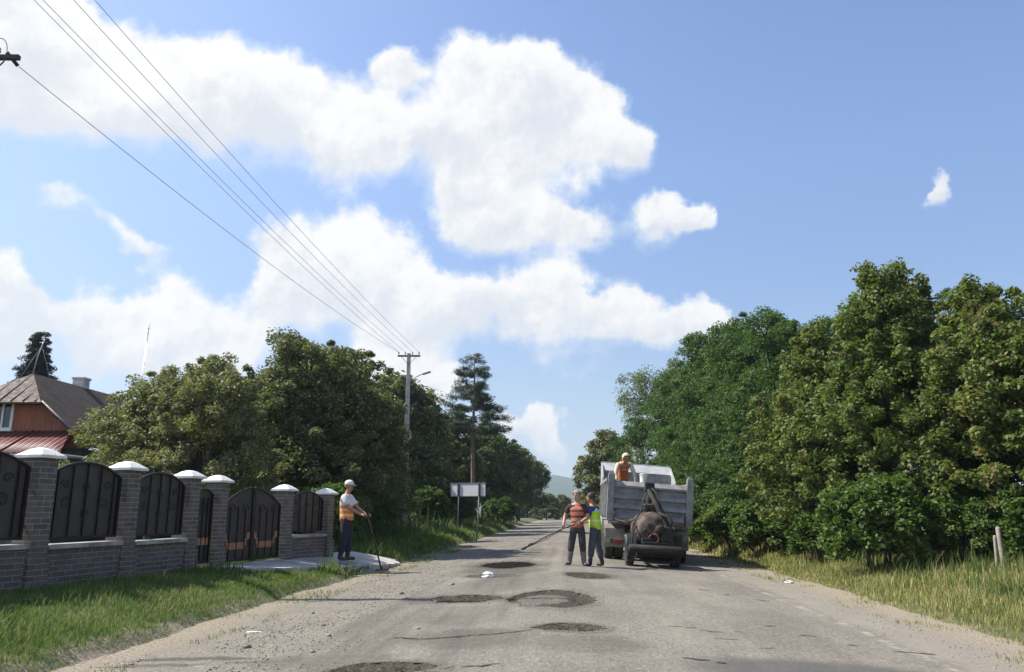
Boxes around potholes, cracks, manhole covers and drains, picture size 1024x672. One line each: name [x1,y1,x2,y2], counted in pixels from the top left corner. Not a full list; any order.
pothole [306,659,459,672]
pothole [411,593,508,605]
pothole [470,561,543,571]
pothole [498,589,616,612]
pothole [553,572,615,580]
pothole [519,622,614,634]
crack [394,630,529,639]
